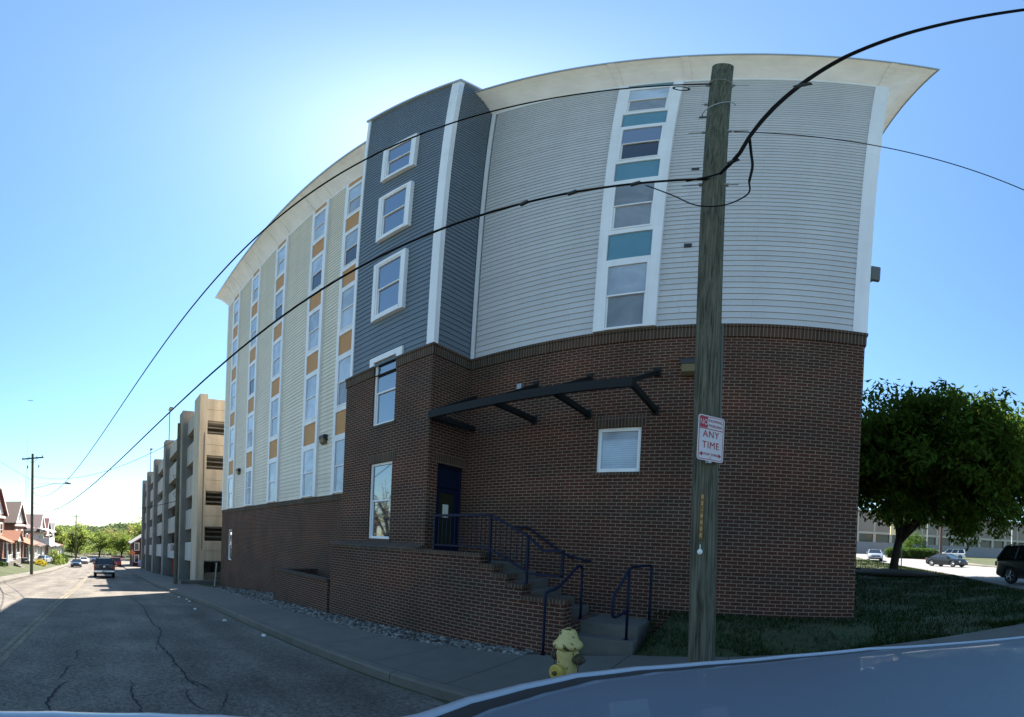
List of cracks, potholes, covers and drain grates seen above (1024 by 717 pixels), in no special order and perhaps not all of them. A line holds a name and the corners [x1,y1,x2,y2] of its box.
crack [127,590,241,713]
crack [31,650,78,711]
